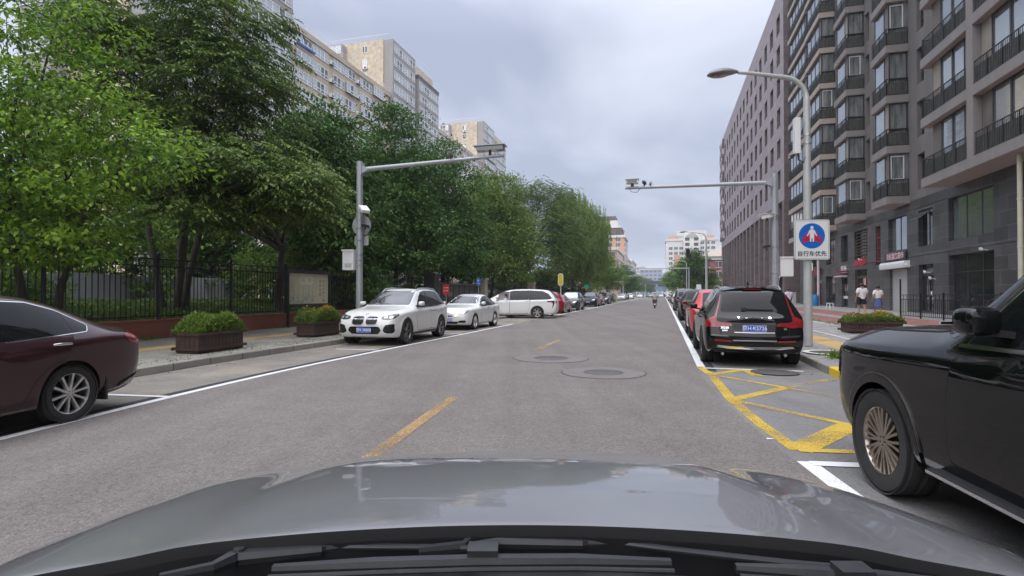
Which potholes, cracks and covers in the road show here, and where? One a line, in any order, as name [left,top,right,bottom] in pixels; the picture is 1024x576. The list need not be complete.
manhole cover [512,354,589,363]
manhole cover [562,367,647,379]
